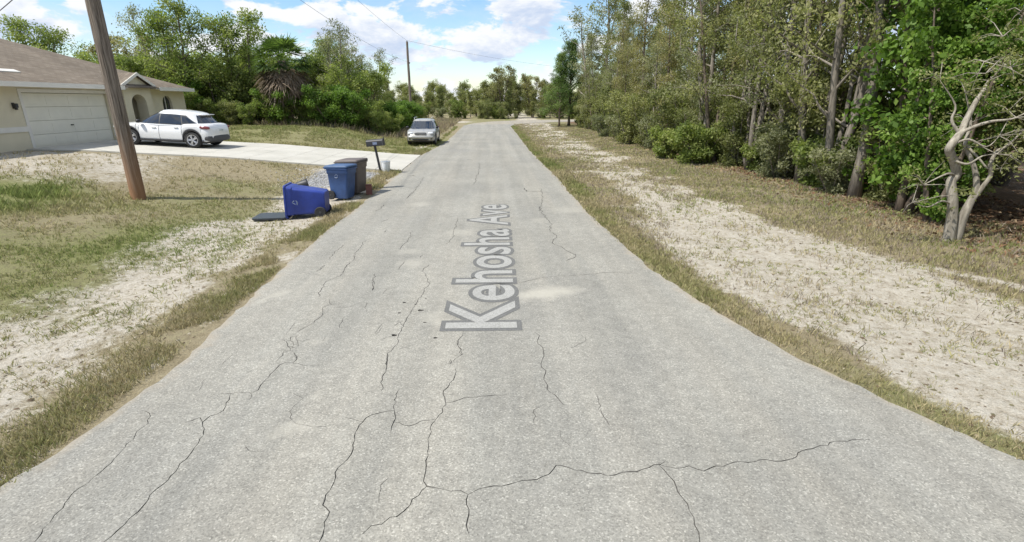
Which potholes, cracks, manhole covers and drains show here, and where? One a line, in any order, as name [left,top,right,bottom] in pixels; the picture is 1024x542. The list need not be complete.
crack [524,188,621,282]
crack [104,205,429,542]
crack [319,369,870,542]
crack [533,335,563,420]
